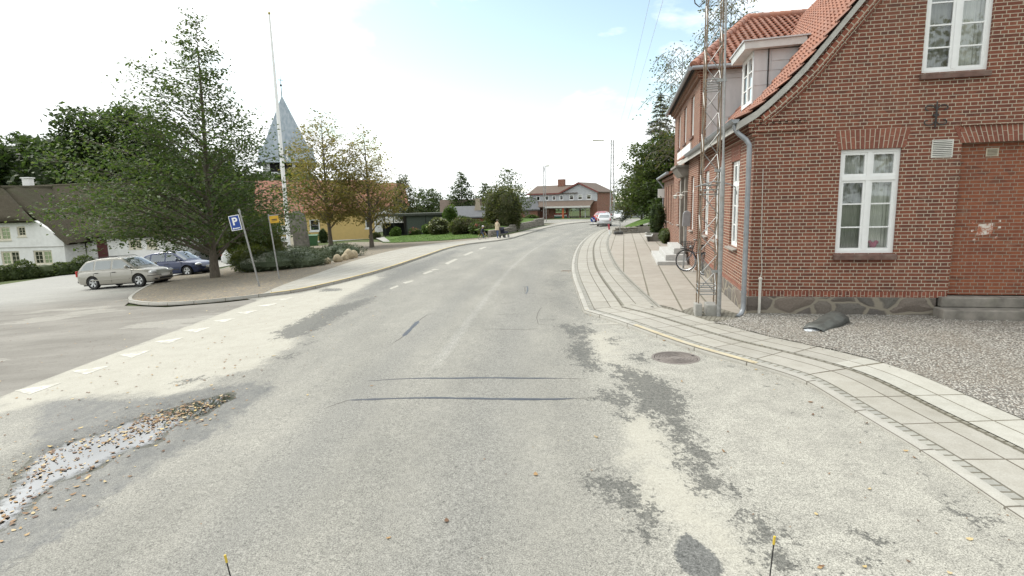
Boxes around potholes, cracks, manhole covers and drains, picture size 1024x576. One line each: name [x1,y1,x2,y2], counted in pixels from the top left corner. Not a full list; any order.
manhole cover [651,351,700,364]
